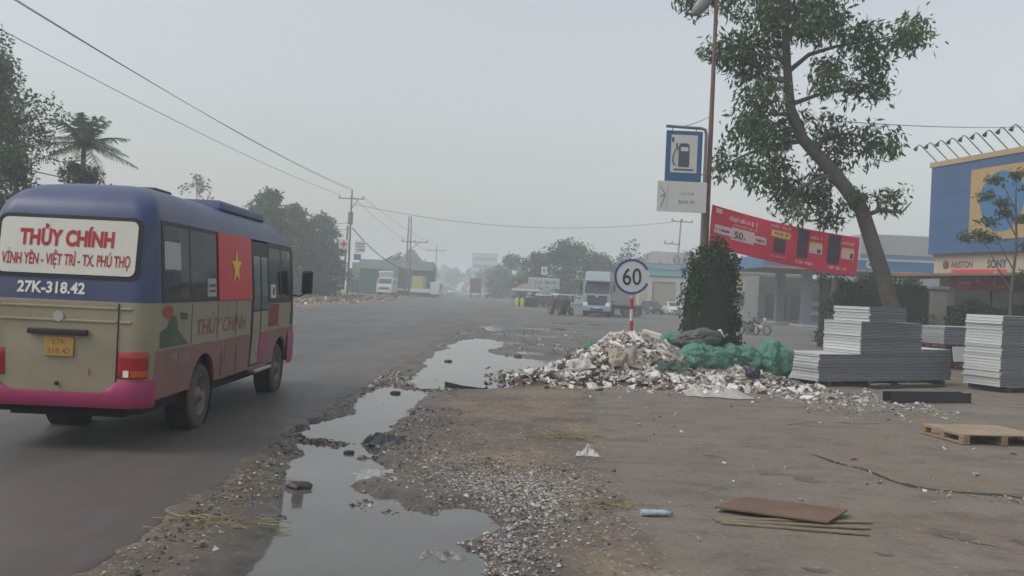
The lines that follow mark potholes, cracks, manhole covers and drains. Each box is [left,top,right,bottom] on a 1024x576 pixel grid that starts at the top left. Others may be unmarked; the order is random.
pothole [242,385,501,576]
crack [808,453,1023,499]
pothole [409,338,550,389]
